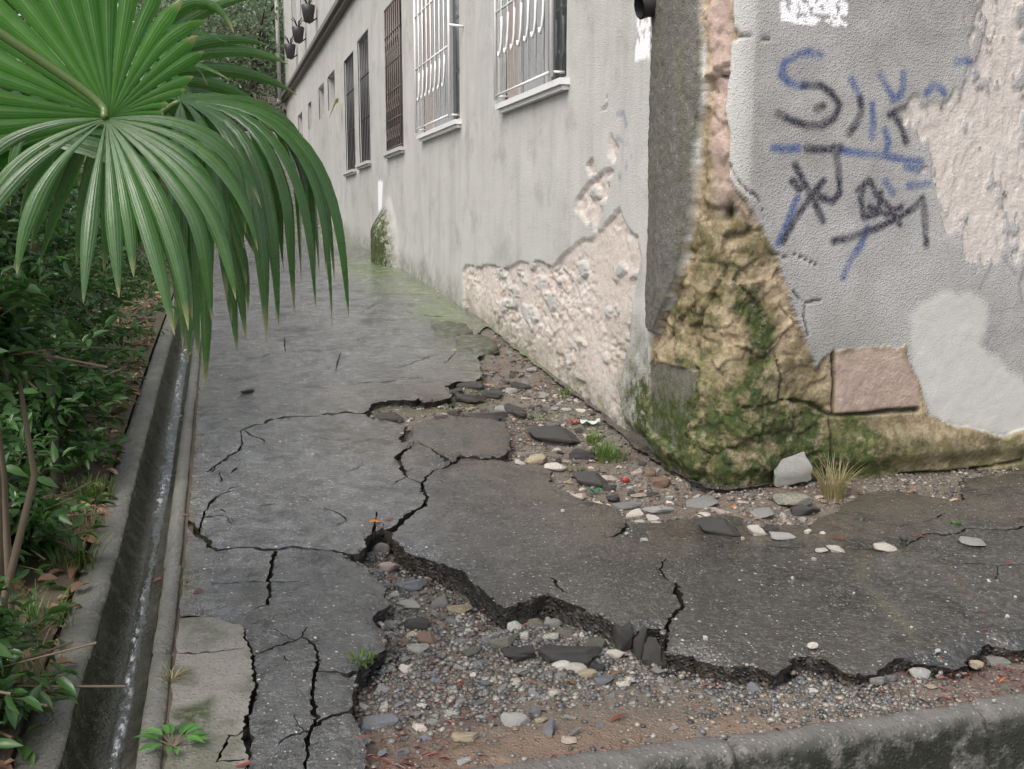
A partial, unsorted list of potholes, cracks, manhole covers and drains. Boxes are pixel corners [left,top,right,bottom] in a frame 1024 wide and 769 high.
pothole [349,527,1024,769]
crack [949,563,1017,580]
crack [841,512,1024,550]
crack [188,410,498,610]
crack [217,627,359,769]
crack [659,558,685,669]
